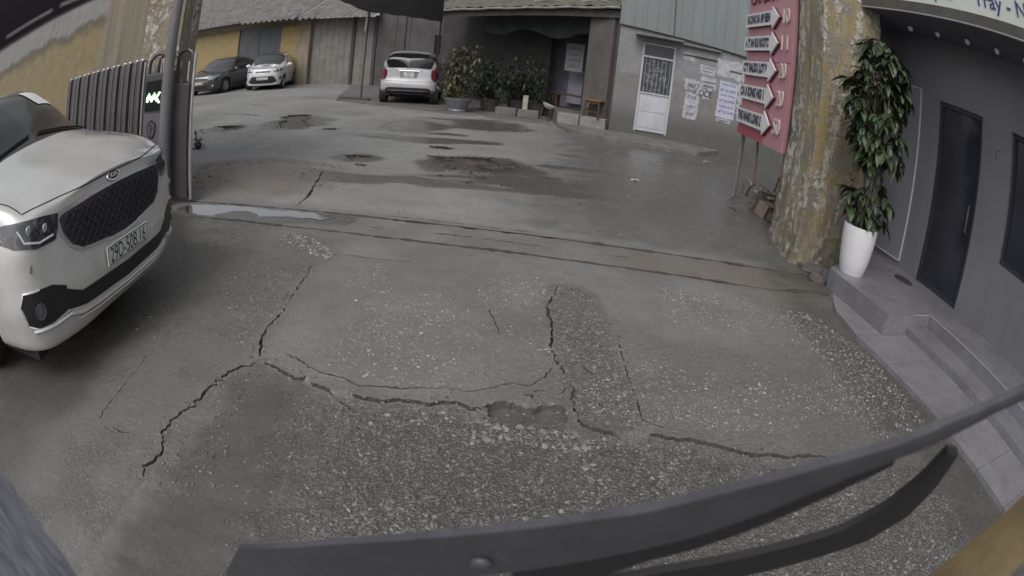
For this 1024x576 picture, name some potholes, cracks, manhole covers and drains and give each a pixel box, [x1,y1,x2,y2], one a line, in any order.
crack [290,169,390,231]
pothole [476,398,579,431]
pothole [273,114,312,131]
pothole [339,153,379,161]
pothole [424,154,524,175]
crack [92,231,829,480]
